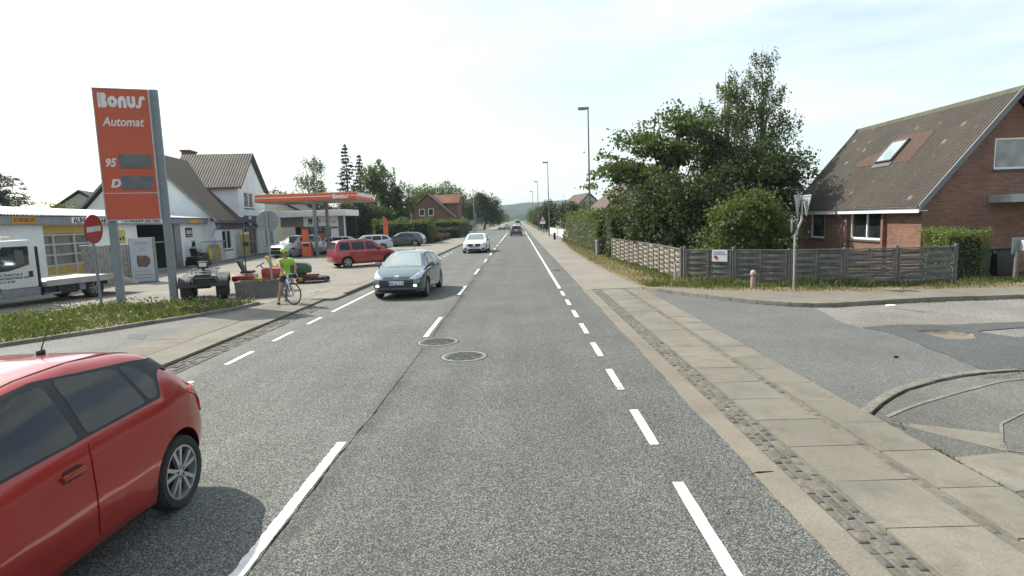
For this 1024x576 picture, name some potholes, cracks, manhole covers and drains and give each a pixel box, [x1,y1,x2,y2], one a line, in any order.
manhole cover [417,338,459,346]
manhole cover [440,351,488,362]
